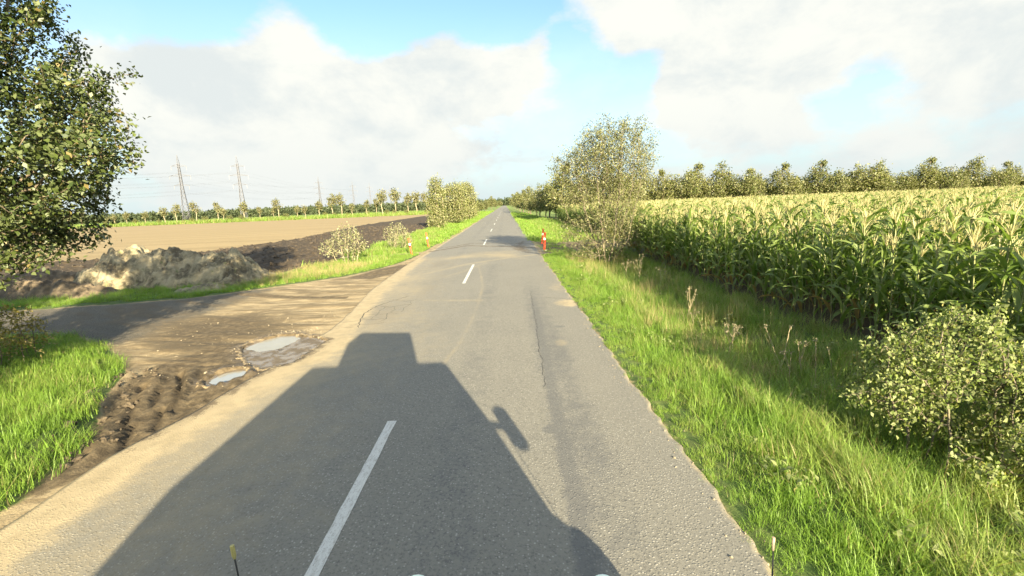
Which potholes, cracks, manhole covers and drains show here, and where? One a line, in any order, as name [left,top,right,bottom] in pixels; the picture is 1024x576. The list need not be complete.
crack [336,297,418,329]
pothole [196,366,255,389]
pothole [235,332,327,371]
